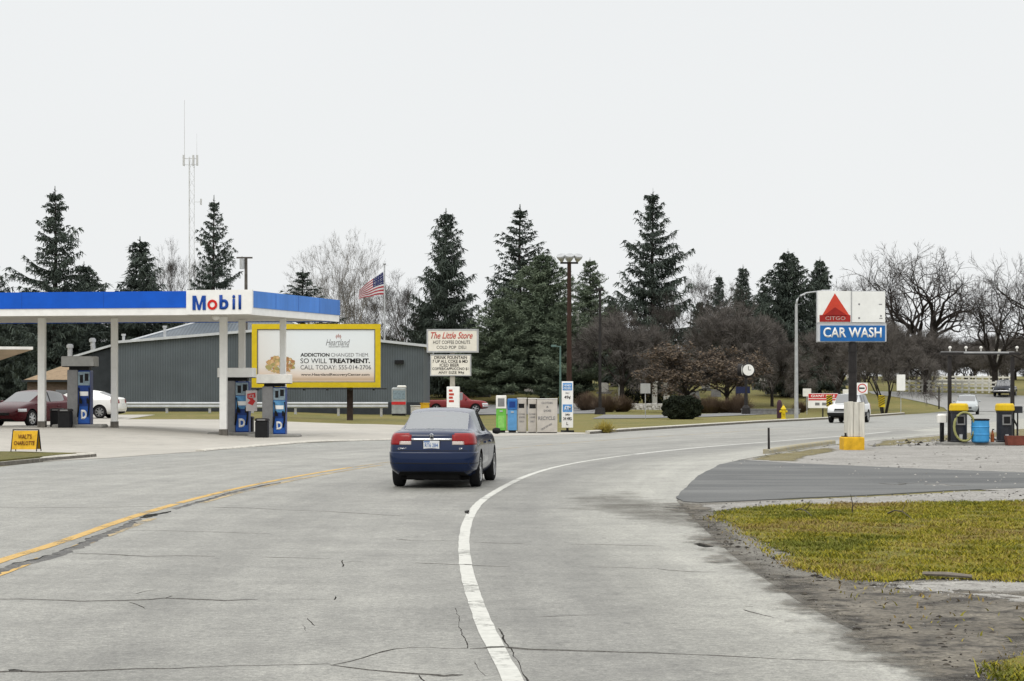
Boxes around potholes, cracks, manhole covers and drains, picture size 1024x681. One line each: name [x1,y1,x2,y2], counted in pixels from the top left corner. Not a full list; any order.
crack [0,608,870,681]
crack [0,506,324,608]
